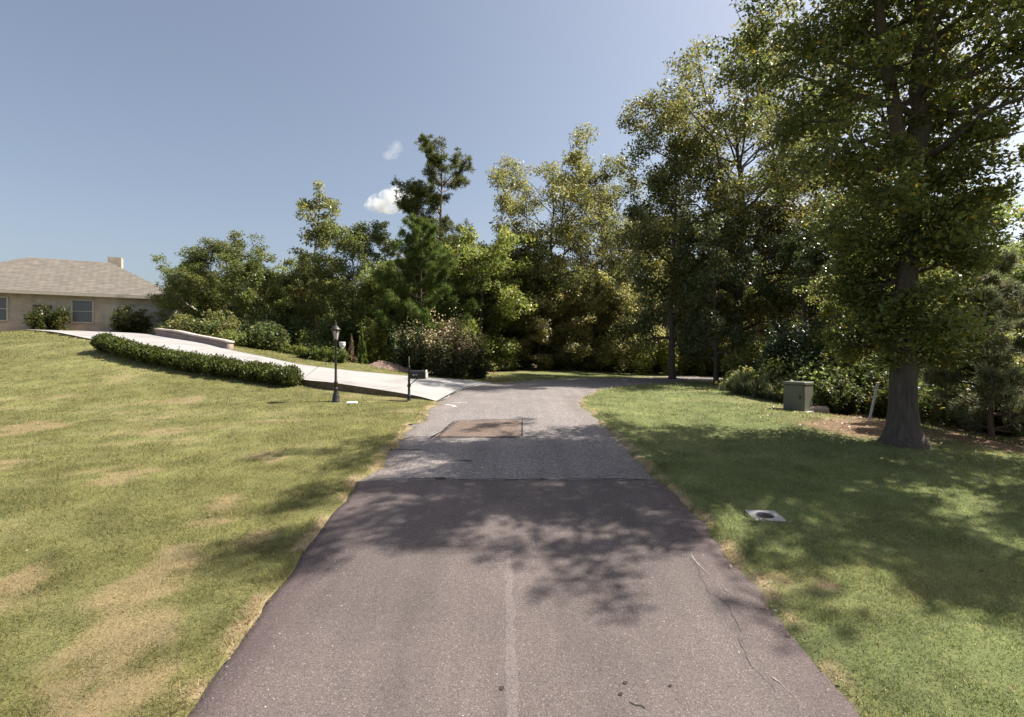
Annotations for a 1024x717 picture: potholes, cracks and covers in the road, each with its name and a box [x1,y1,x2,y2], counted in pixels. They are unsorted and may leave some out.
crack [685,553,775,691]
manhole cover [744,510,786,522]
